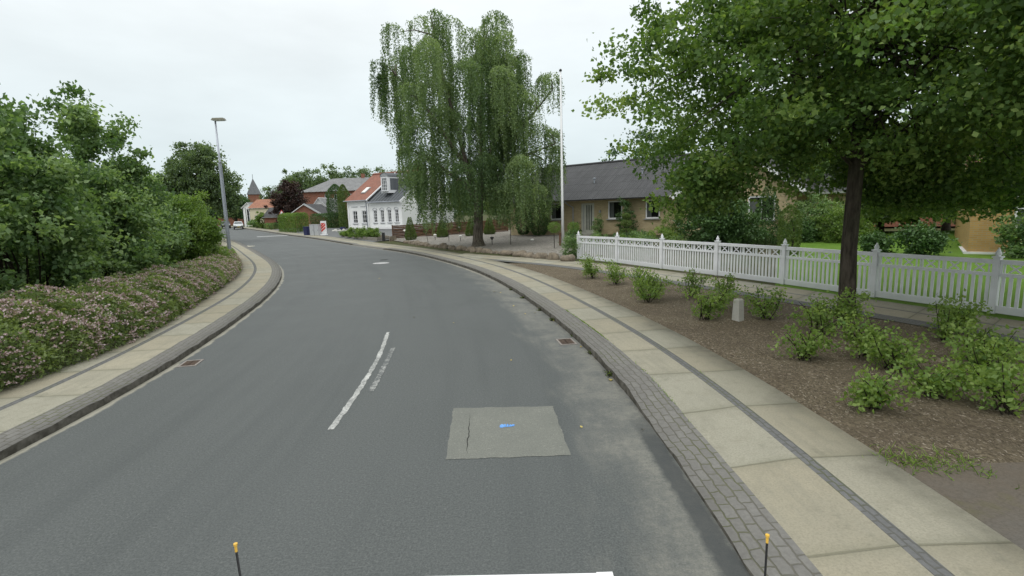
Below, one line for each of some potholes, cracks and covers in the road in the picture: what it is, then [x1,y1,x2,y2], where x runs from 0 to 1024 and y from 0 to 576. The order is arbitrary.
drain grate [176,359,204,368]
